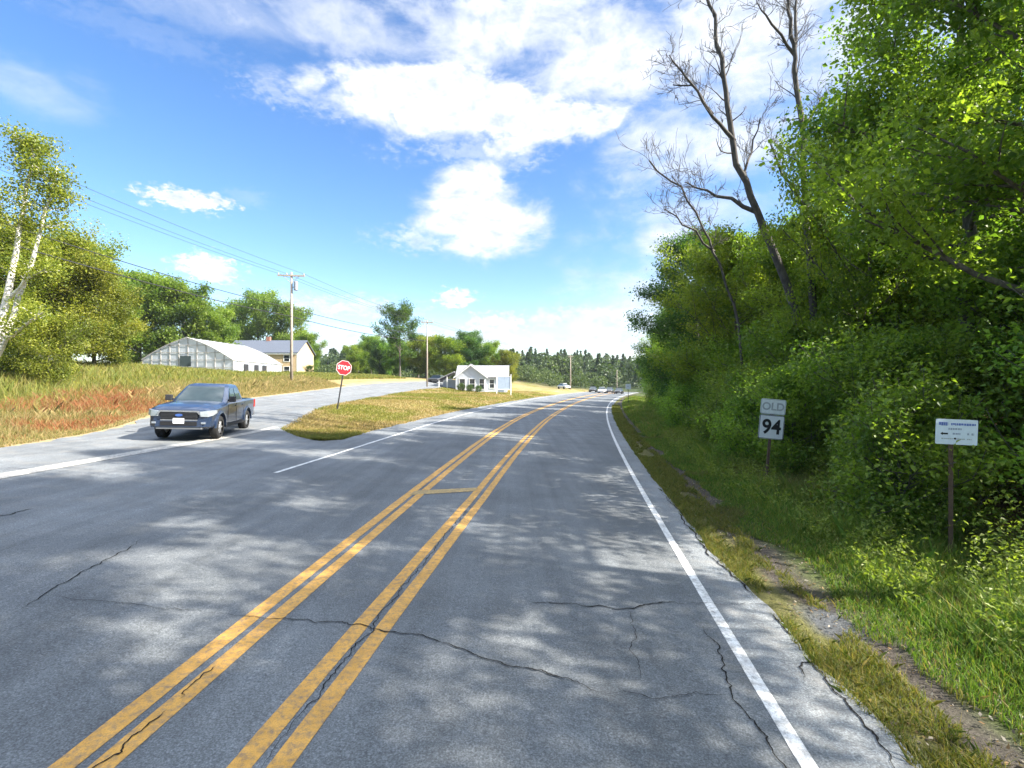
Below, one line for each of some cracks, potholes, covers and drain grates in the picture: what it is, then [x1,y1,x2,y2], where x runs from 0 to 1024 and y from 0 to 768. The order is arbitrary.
crack [22,493,895,768]
